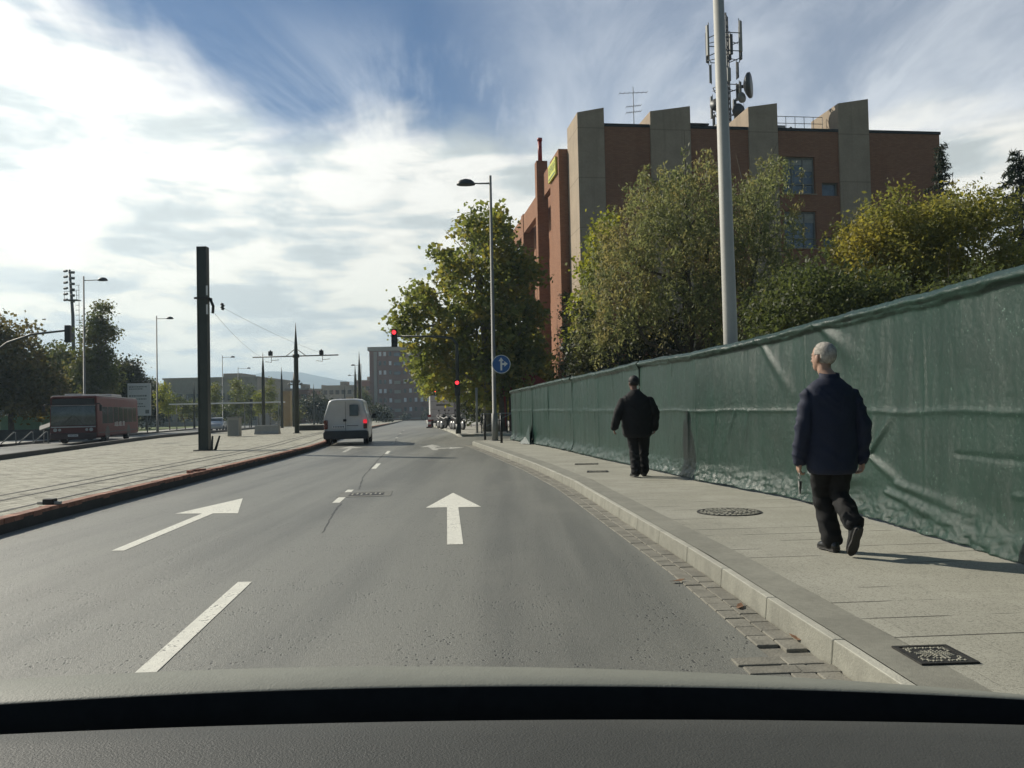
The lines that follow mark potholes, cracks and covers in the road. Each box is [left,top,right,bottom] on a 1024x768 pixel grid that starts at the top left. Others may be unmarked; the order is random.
manhole cover [697,508,762,516]
manhole cover [891,644,980,666]
